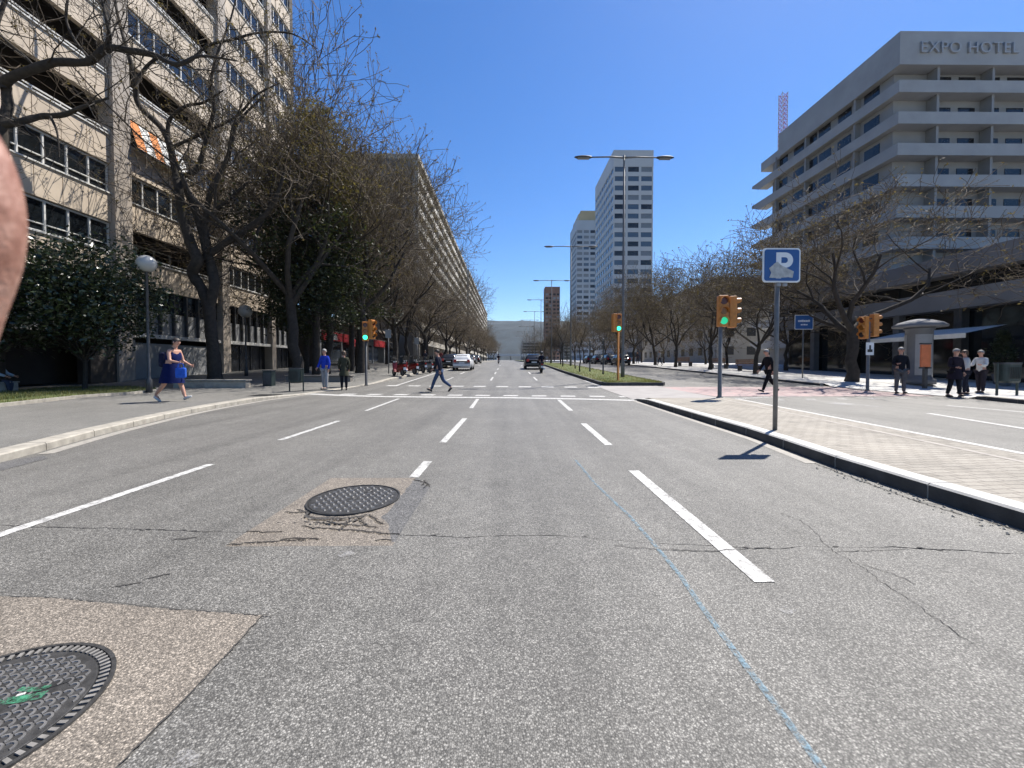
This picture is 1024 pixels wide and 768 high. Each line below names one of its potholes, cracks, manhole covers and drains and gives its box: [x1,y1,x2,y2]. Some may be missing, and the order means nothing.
manhole cover [0,642,117,768]
crack [823,466,1022,532]
manhole cover [305,485,400,516]
crack [7,480,1022,643]
